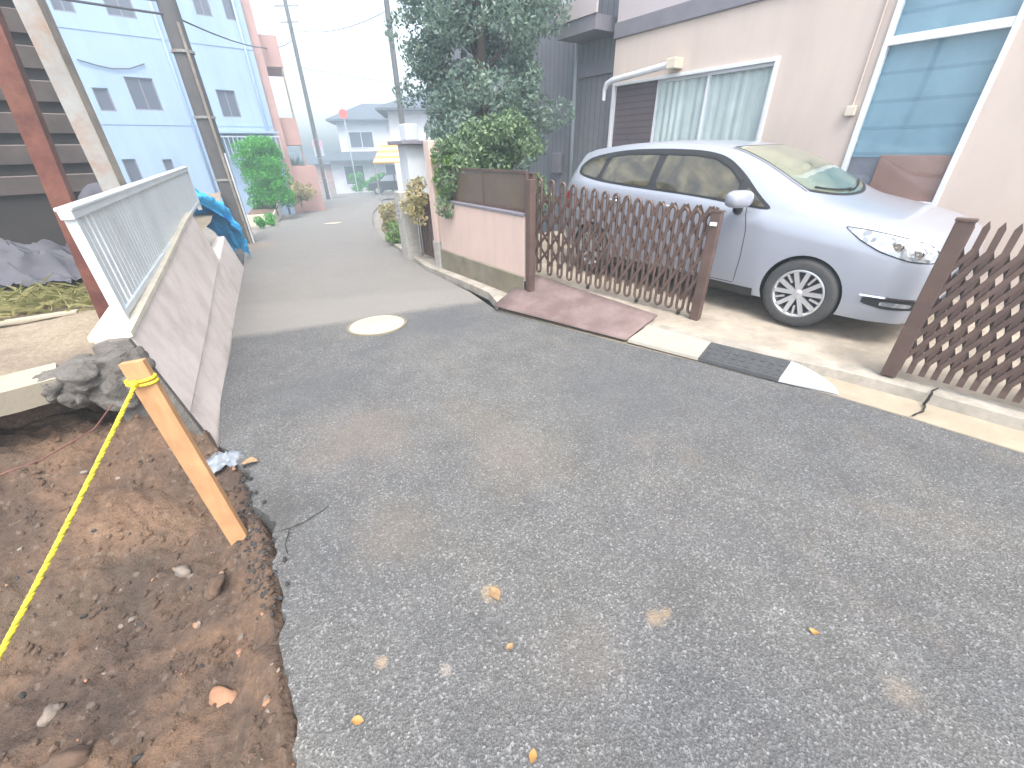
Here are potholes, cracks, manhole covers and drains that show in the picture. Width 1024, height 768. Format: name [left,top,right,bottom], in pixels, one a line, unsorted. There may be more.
crack [274,505,329,554]
crack [911,388,939,416]
manhole cover [347,315,407,337]
